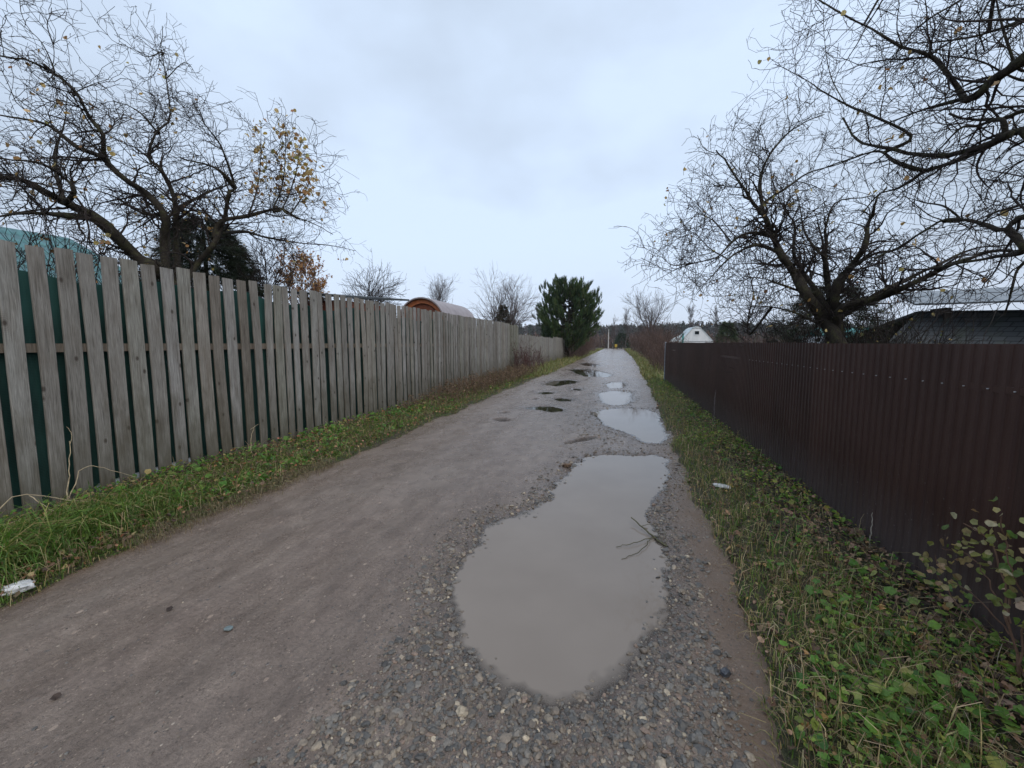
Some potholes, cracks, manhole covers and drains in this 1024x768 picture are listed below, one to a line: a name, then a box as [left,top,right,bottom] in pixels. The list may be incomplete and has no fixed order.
pothole [584,406,674,446]
pothole [413,449,706,762]
pothole [593,390,637,406]
pothole [569,368,614,377]
pothole [520,404,567,412]
